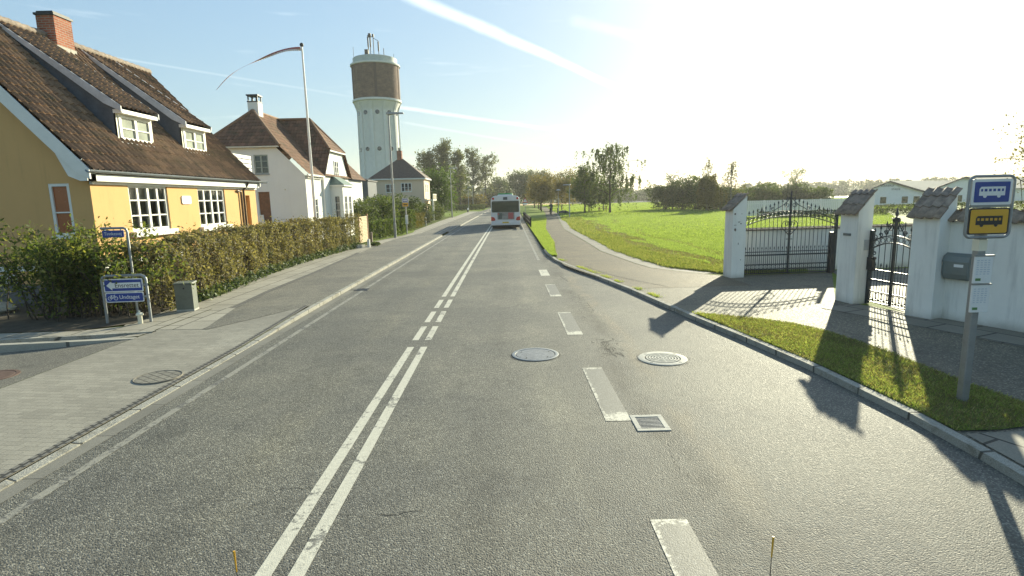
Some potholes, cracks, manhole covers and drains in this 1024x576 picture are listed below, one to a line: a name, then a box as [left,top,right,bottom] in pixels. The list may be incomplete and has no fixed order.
manhole cover [0,369,21,380]
manhole cover [132,370,183,385]
manhole cover [635,351,690,366]
drain grate [629,414,672,432]
manhole cover [510,348,561,362]
